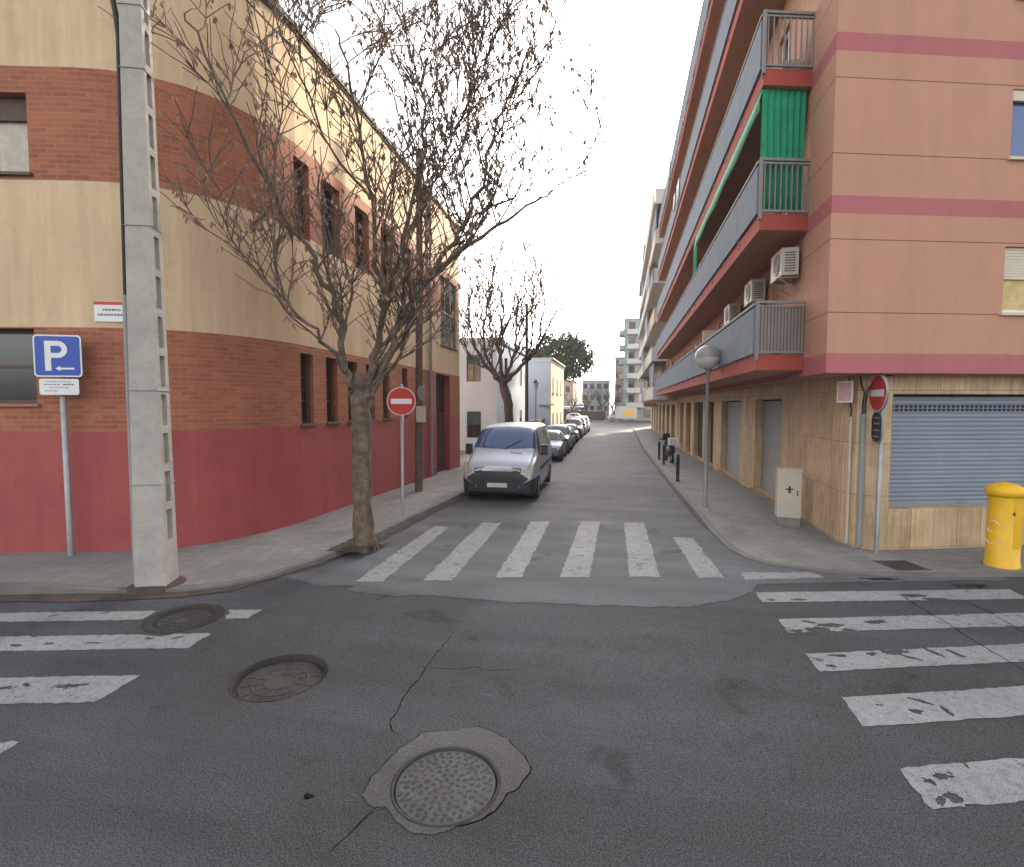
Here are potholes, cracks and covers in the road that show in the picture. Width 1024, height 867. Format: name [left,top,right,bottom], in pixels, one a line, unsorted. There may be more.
manhole cover [390,746,500,827]
manhole cover [141,604,225,633]
crack [364,637,532,830]
crack [331,807,377,851]
manhole cover [229,654,328,702]
